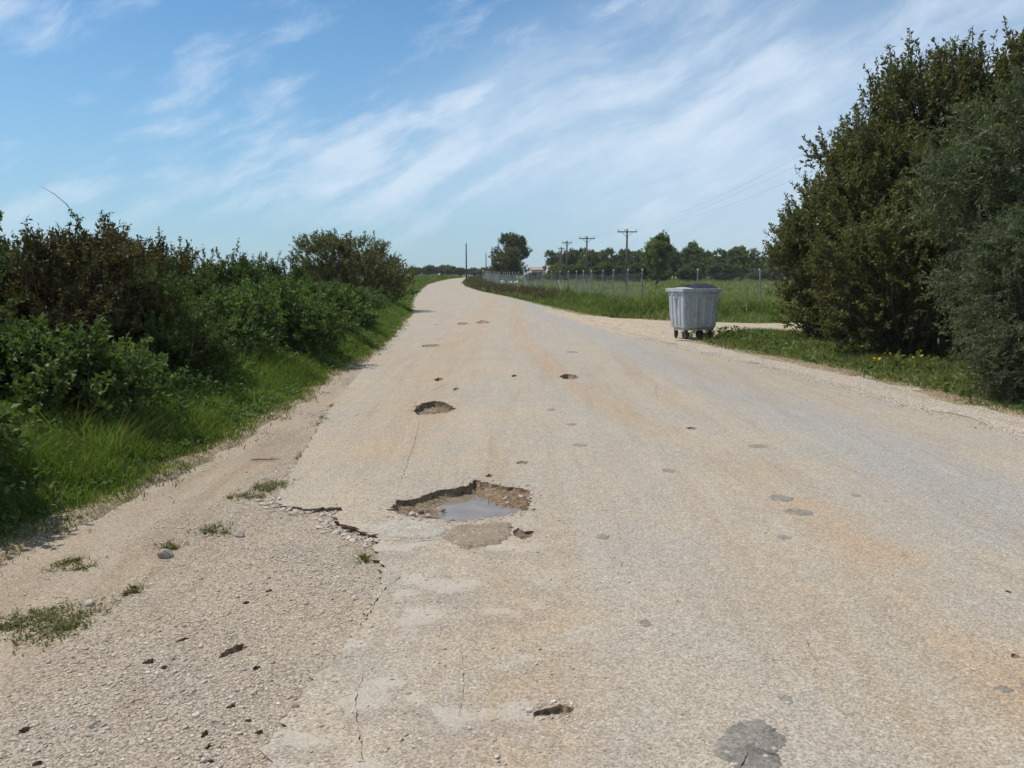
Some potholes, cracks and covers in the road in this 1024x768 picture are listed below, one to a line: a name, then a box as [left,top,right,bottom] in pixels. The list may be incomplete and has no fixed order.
pothole [386,480,532,522]
pothole [533,705,574,717]
pothole [413,401,456,415]
